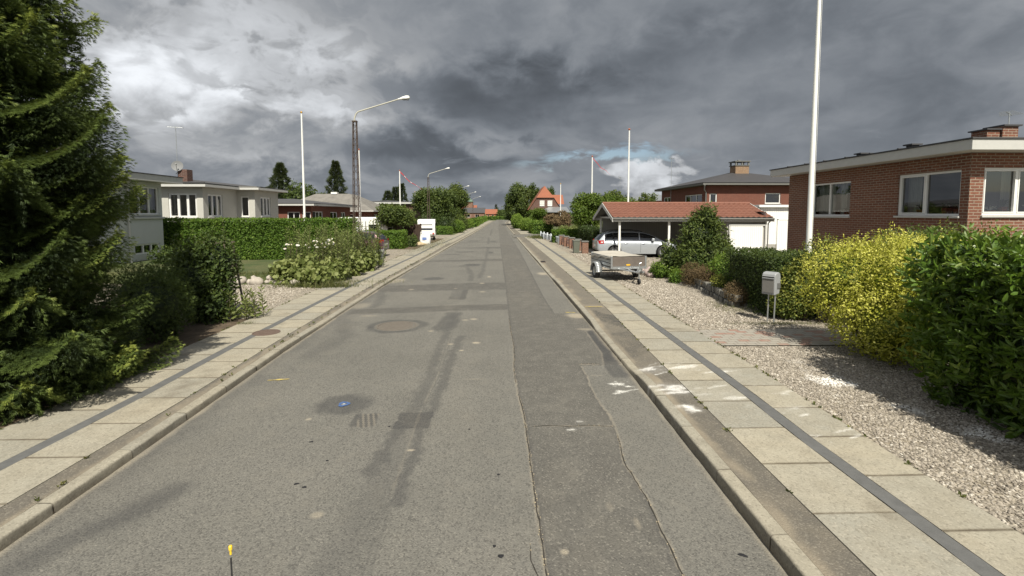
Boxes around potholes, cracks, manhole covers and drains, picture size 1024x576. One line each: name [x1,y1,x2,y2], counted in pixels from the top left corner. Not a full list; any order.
manhole cover [376,321,416,331]
crack [519,397,685,576]
